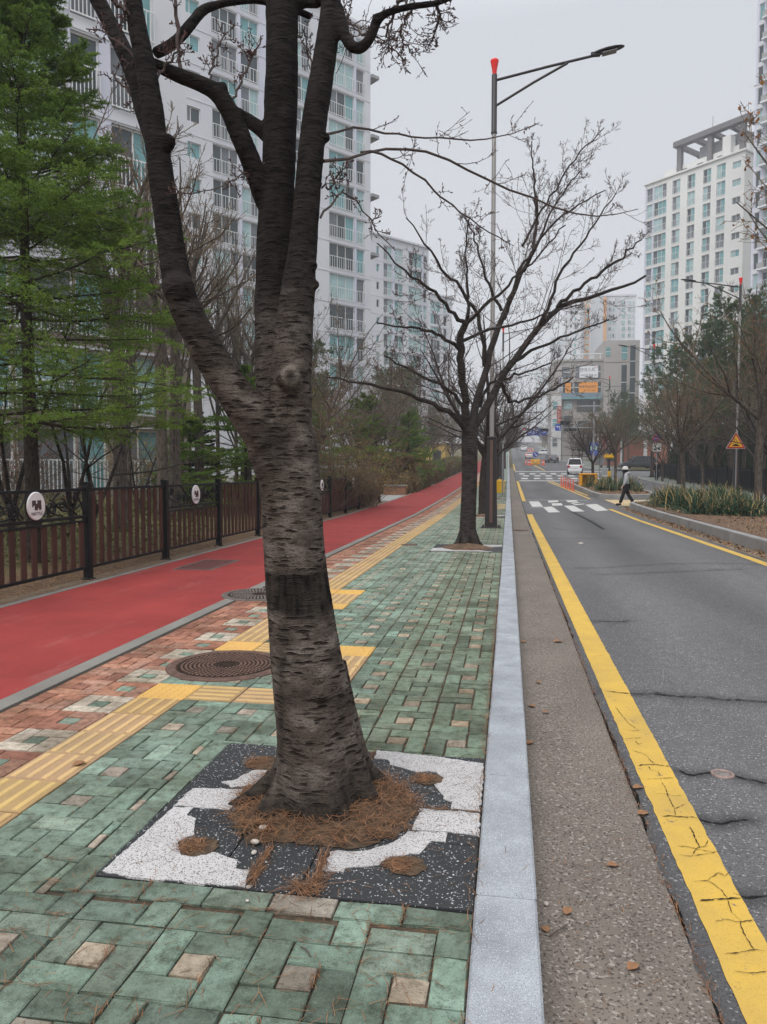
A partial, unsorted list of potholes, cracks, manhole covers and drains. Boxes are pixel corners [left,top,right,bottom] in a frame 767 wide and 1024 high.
utility cover [710,769,735,779]
manhole cover [221,588,267,602]
crack [617,692,767,973]
manhole cover [166,650,271,683]
